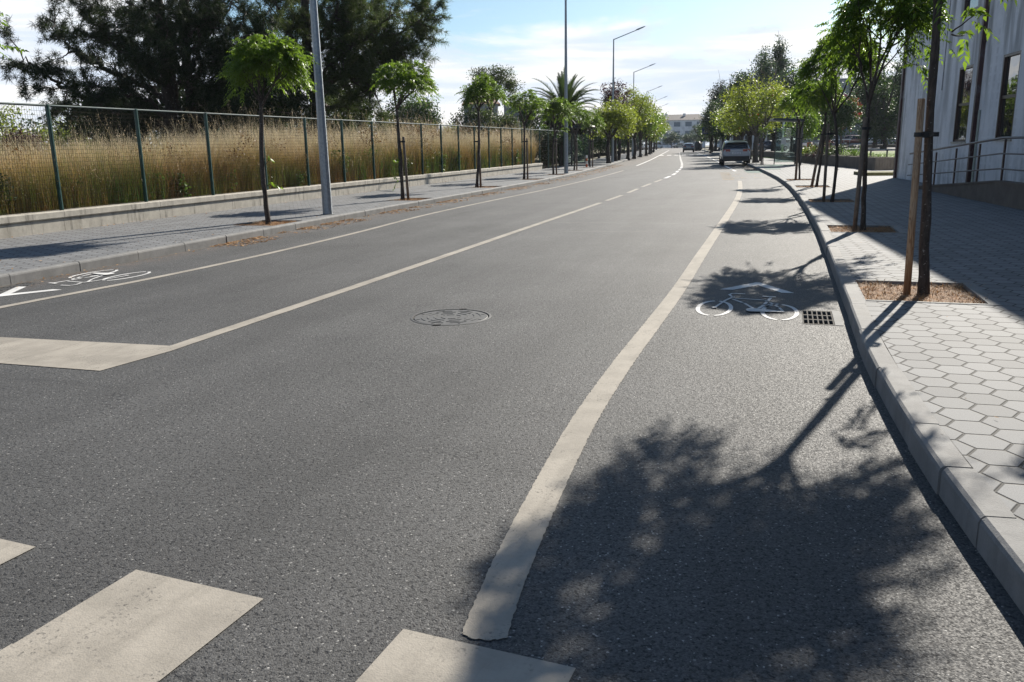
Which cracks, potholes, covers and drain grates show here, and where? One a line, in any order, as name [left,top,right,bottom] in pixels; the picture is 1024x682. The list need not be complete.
manhole cover [410,308,491,326]
drain grate [802,310,843,326]
